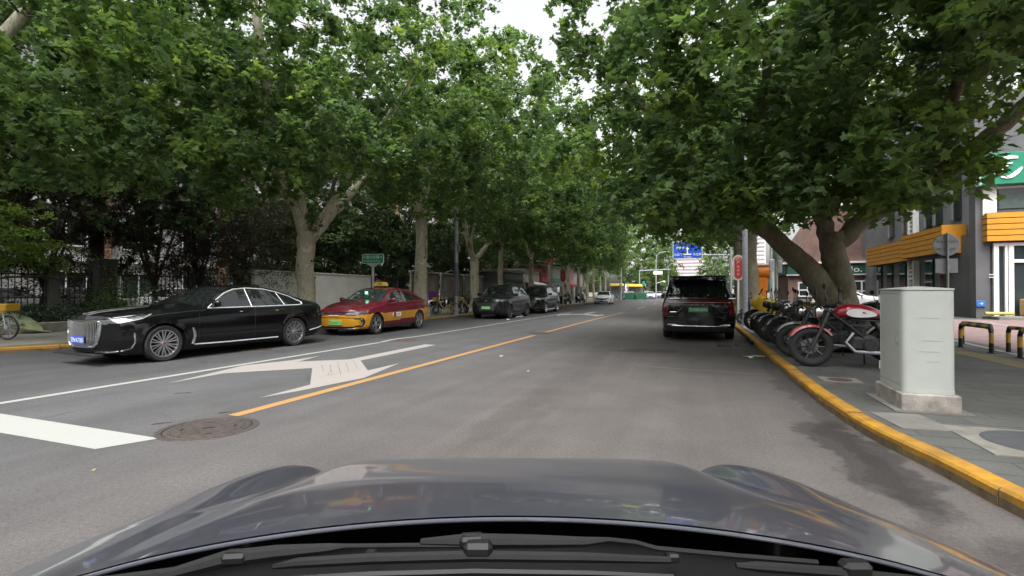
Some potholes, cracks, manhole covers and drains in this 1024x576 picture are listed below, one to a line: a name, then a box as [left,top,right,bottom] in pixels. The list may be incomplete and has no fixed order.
manhole cover [817,376,865,384]
manhole cover [153,417,259,442]
